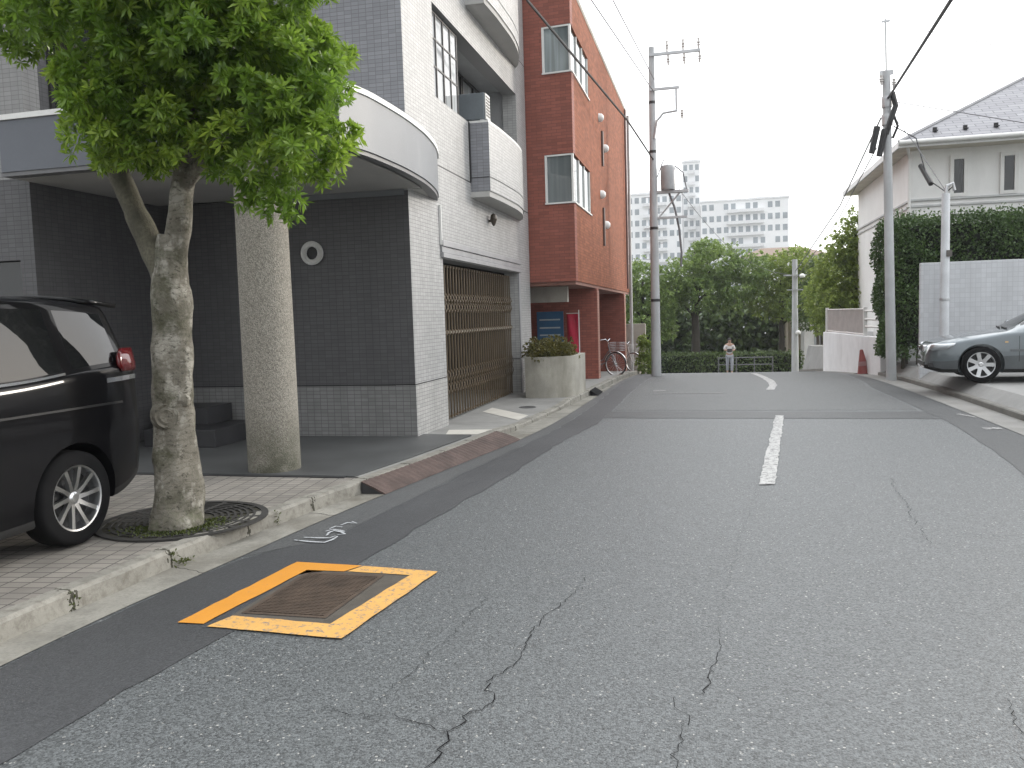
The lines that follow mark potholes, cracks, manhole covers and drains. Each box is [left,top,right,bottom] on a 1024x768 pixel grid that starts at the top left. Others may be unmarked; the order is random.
crack [305,579,585,767]
crack [670,489,757,768]
